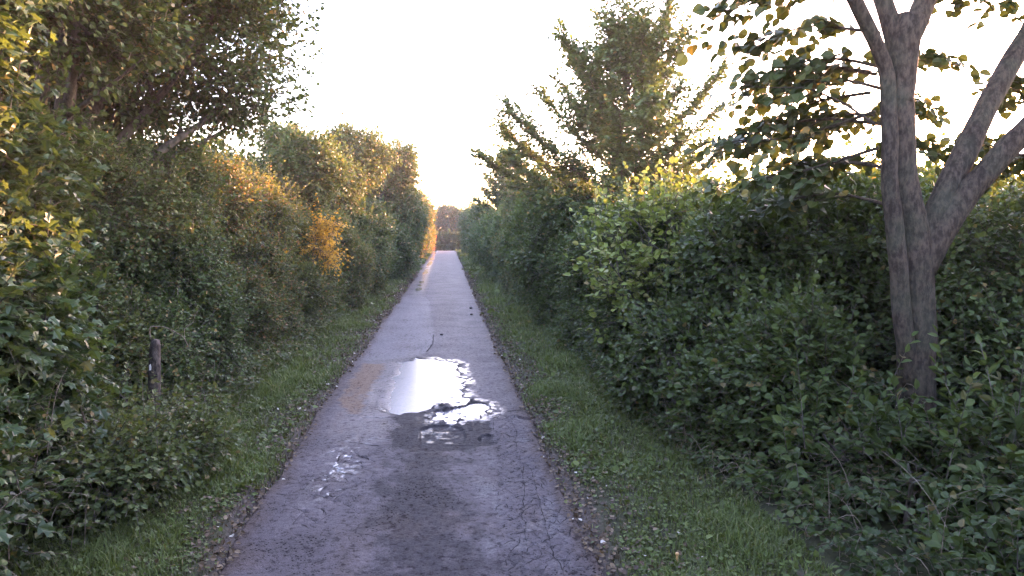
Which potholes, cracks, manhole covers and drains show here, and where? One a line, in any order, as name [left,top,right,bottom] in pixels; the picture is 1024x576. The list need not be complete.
pothole [430,402,491,424]
pothole [418,424,467,445]
crack [493,415,595,576]
pothole [477,433,495,443]
